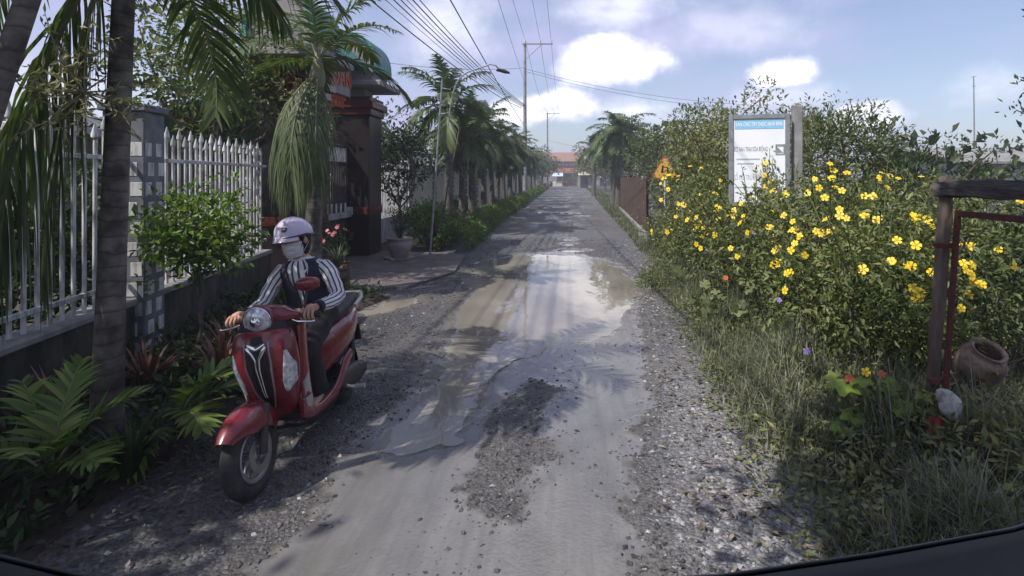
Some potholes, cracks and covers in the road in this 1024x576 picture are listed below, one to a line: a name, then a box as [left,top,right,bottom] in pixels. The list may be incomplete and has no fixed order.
pothole [370,254,651,460]
